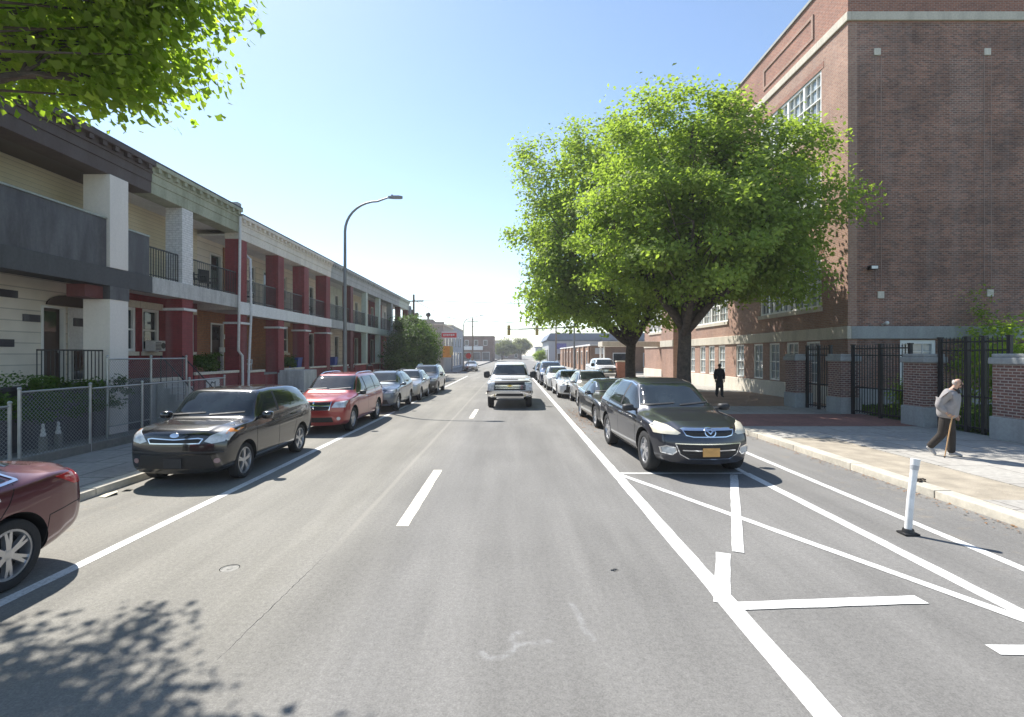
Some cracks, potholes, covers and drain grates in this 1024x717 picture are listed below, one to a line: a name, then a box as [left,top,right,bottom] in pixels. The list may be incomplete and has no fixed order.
manhole cover [219,564,240,572]
